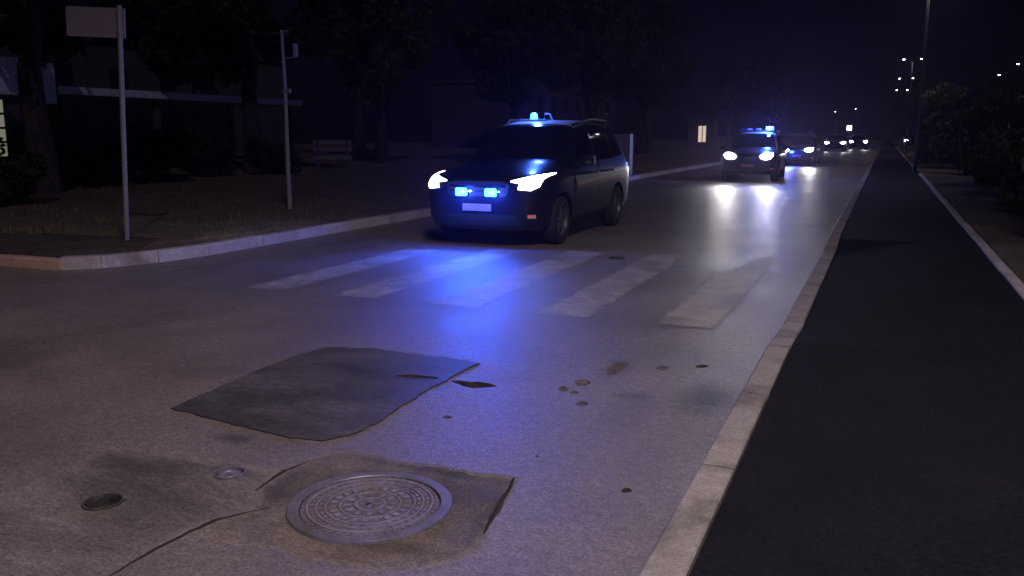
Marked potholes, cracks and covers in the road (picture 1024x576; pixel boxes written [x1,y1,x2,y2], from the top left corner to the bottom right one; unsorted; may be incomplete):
crack [483,477,515,534]
manhole cover [213,466,246,480]
crack [255,461,308,491]
pothole [451,380,495,388]
crack [109,509,264,576]
manhole cover [286,471,453,545]
pothole [606,362,629,375]
